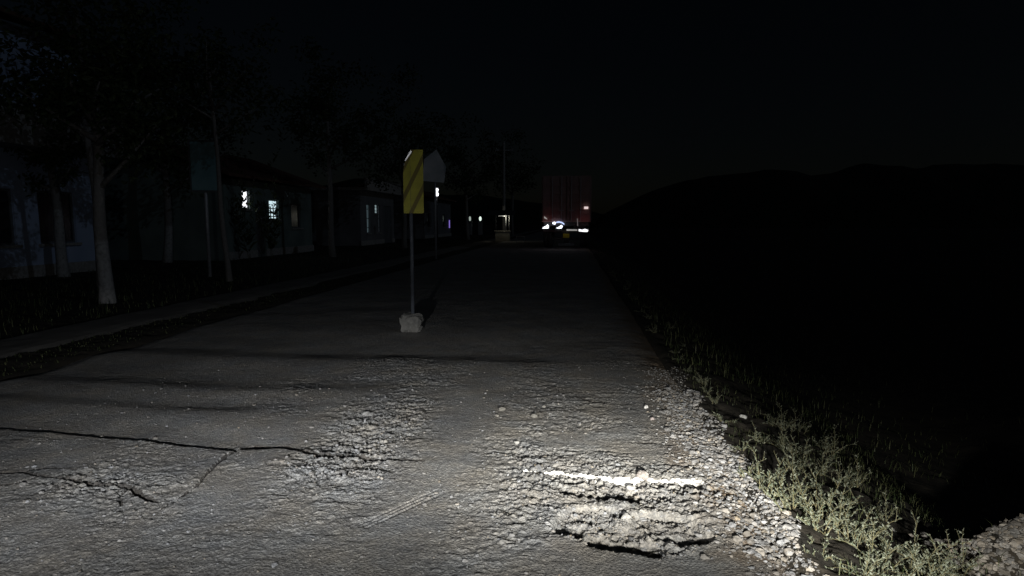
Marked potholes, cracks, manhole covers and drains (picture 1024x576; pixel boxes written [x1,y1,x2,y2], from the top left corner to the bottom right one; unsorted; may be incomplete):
pothole [521,469,710,506]
crack [0,429,425,511]
pothole [549,503,717,559]
